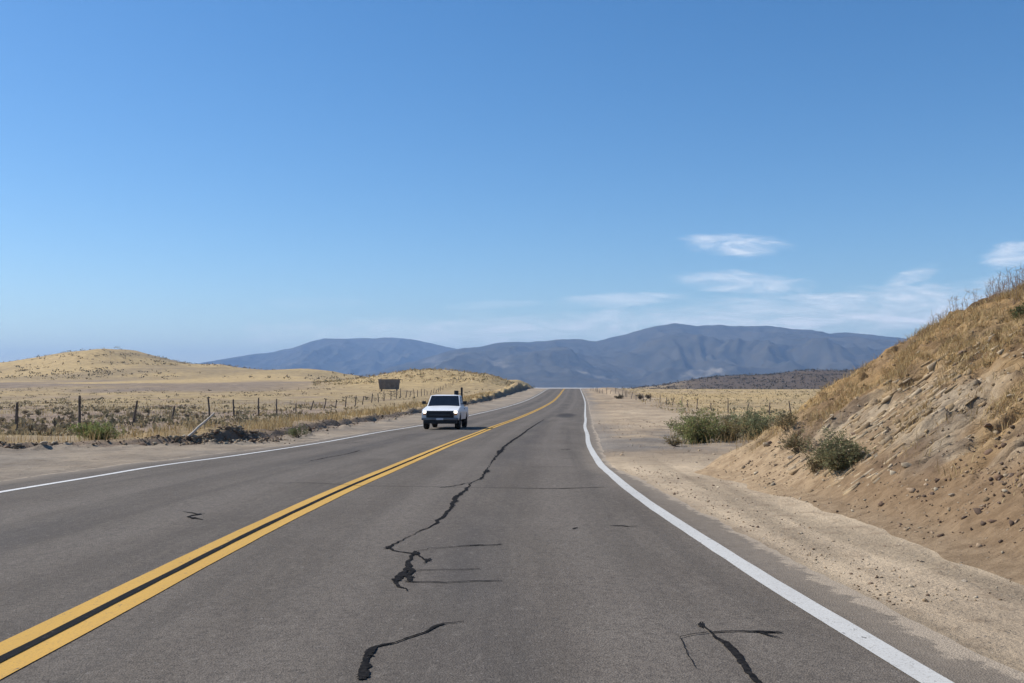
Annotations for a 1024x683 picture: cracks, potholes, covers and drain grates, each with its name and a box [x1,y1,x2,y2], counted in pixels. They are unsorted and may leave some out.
crack [680,622,781,683]
